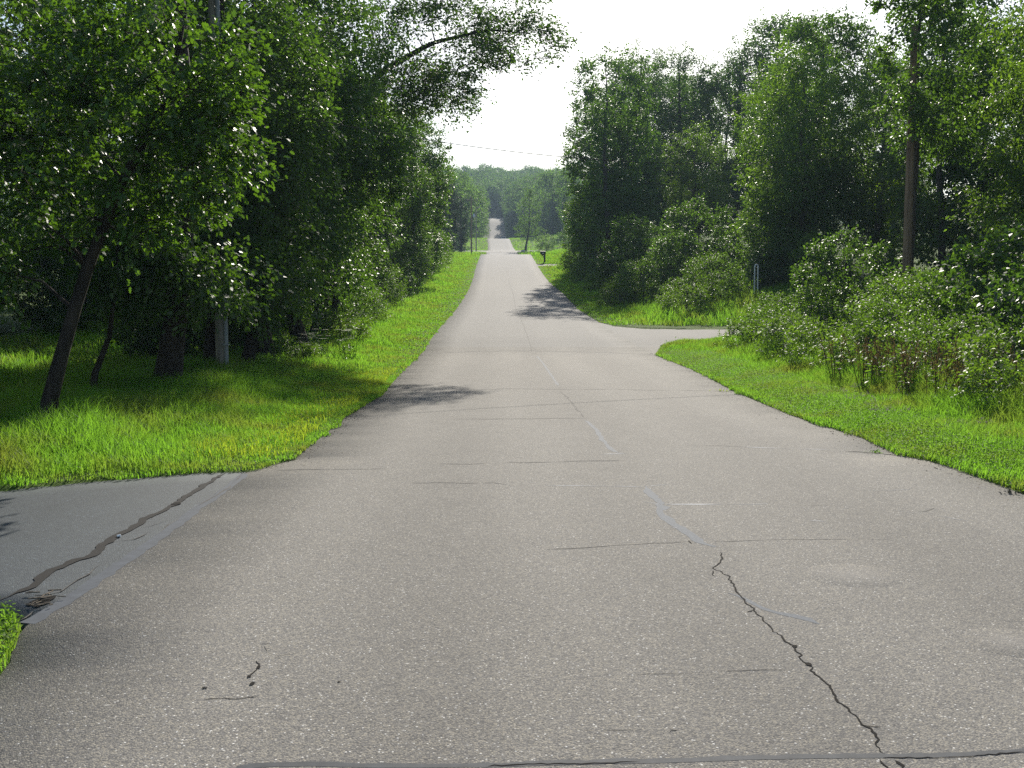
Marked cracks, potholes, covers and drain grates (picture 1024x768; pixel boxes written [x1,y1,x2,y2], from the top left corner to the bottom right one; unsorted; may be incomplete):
crack [649,552,1023,768]
